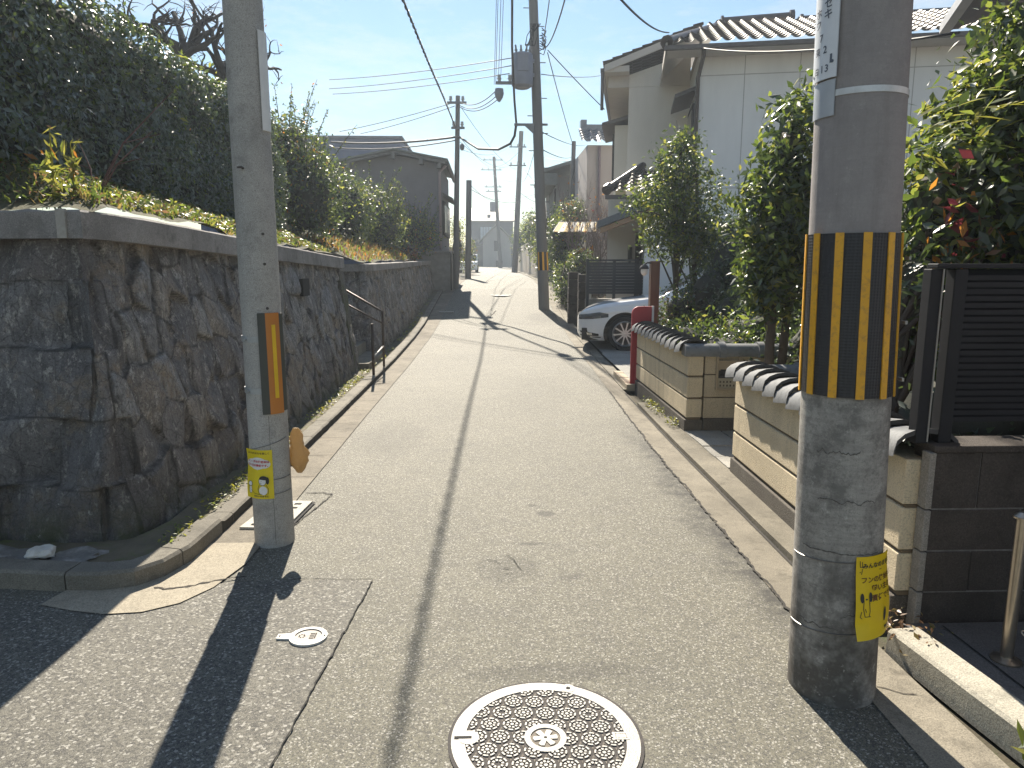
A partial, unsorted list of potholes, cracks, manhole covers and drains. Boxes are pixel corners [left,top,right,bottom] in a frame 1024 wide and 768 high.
manhole cover [448,682,645,768]
manhole cover [276,627,328,647]
